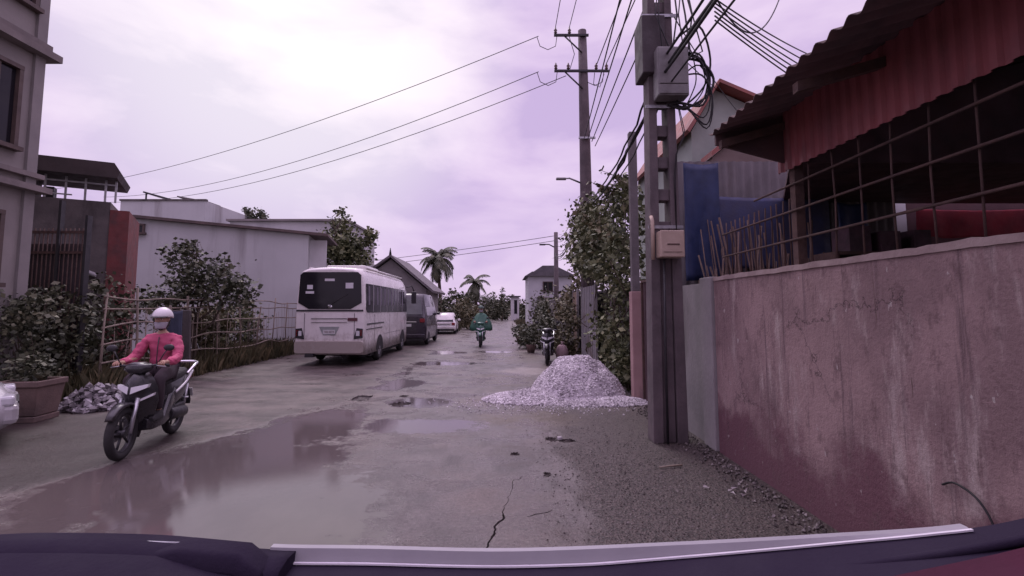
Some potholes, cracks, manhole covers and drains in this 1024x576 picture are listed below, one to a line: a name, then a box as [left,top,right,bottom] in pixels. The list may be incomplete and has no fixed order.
crack [486,478,521,548]
